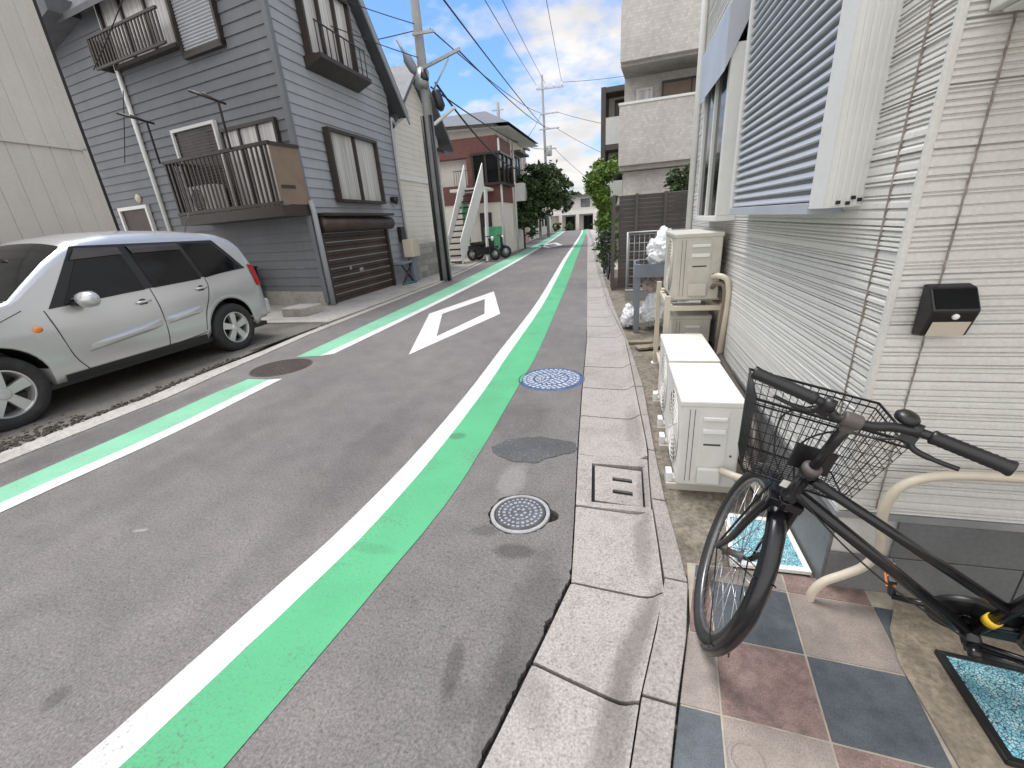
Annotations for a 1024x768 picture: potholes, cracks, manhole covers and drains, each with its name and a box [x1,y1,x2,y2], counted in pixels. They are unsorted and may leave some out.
manhole cover [489,495,558,534]
manhole cover [249,358,313,377]
manhole cover [519,368,585,391]
